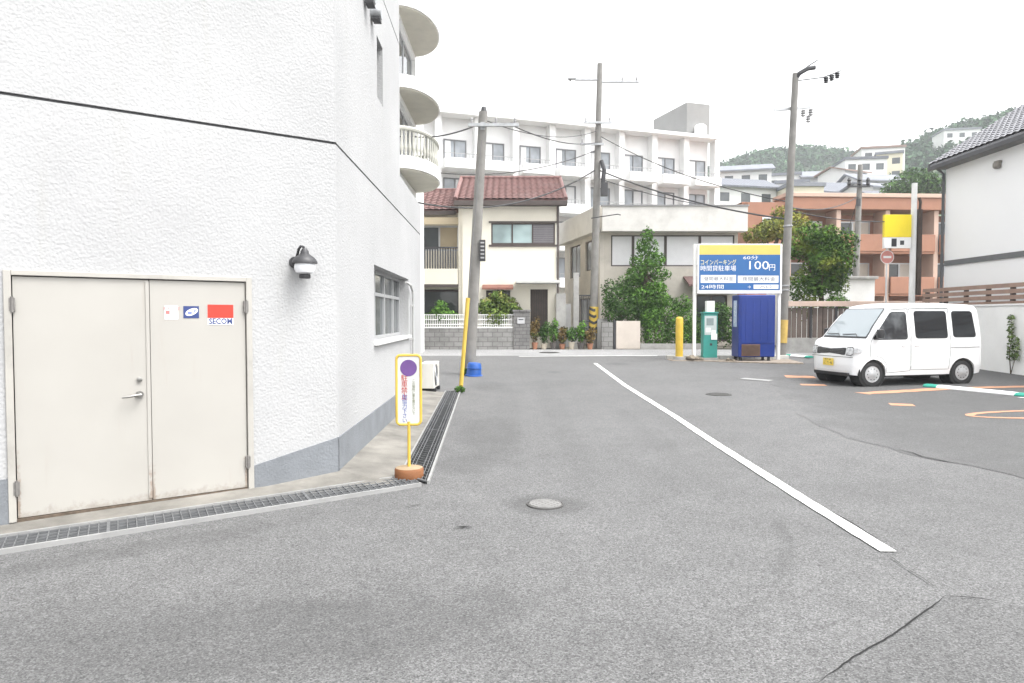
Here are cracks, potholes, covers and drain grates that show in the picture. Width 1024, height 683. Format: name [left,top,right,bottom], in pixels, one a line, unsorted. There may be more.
drain grate [0,476,422,555]
manhole cover [527,499,564,510]
drain grate [404,391,461,484]
crack [819,514,996,682]
